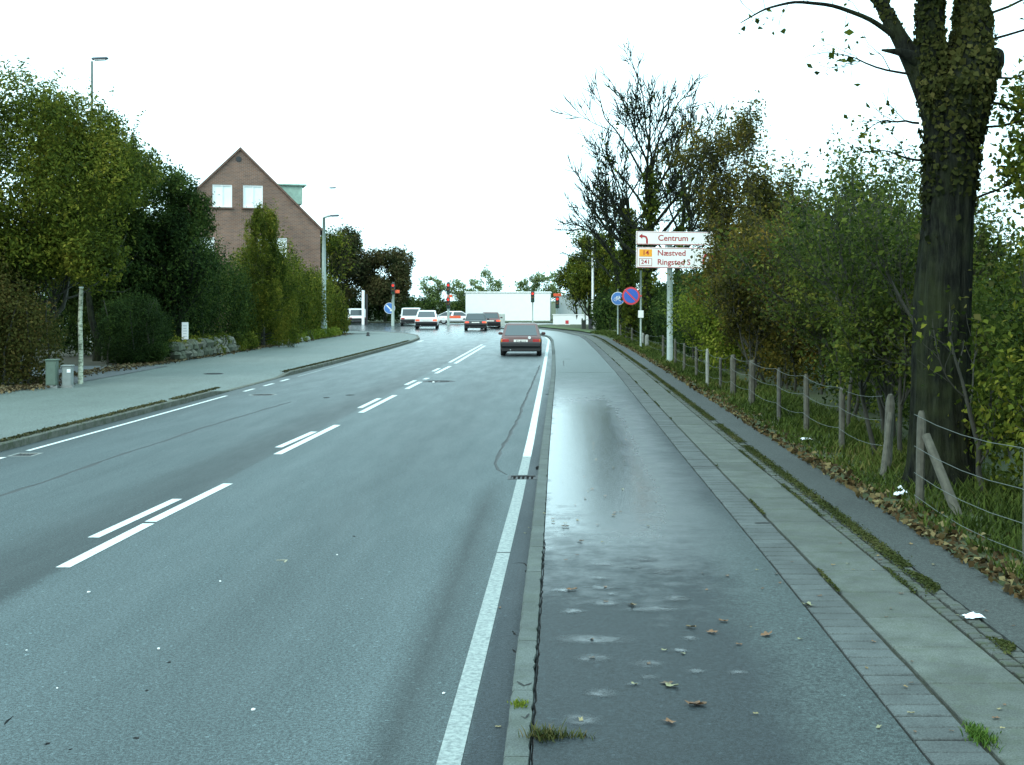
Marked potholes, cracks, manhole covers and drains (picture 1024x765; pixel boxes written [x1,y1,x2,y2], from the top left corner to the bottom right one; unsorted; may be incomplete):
crack [512,541,546,765]
